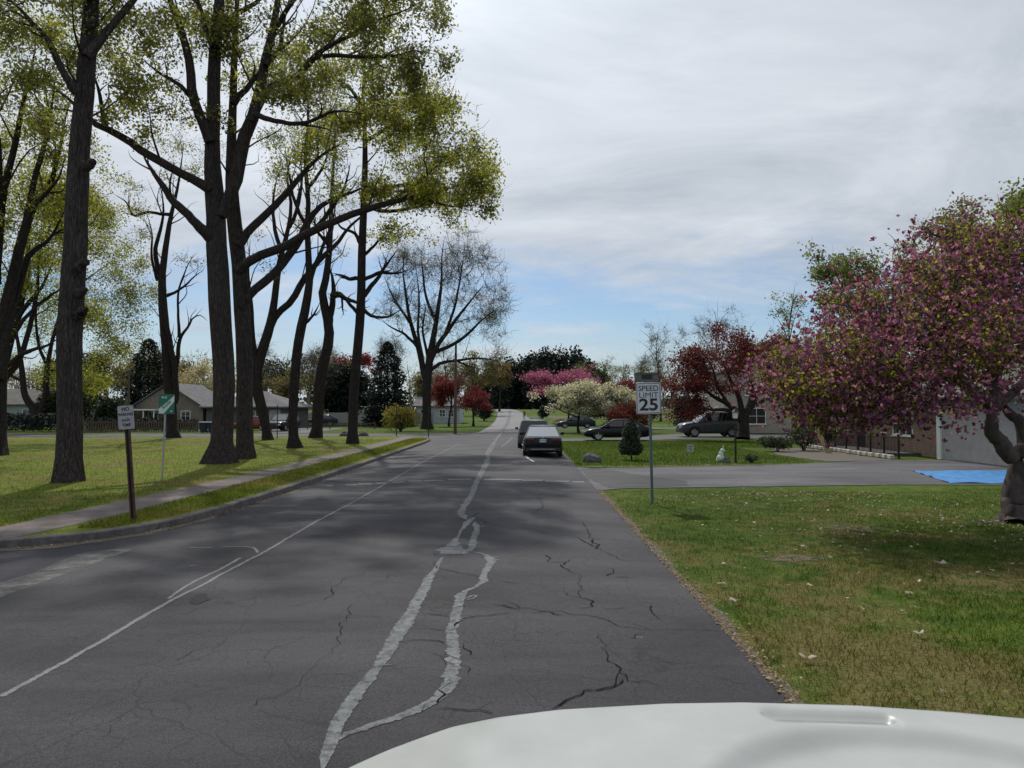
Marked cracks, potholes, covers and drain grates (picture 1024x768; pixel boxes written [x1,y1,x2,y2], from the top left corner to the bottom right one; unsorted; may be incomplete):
crack [105,554,472,736]
crack [404,555,711,713]
crack [529,500,641,578]
